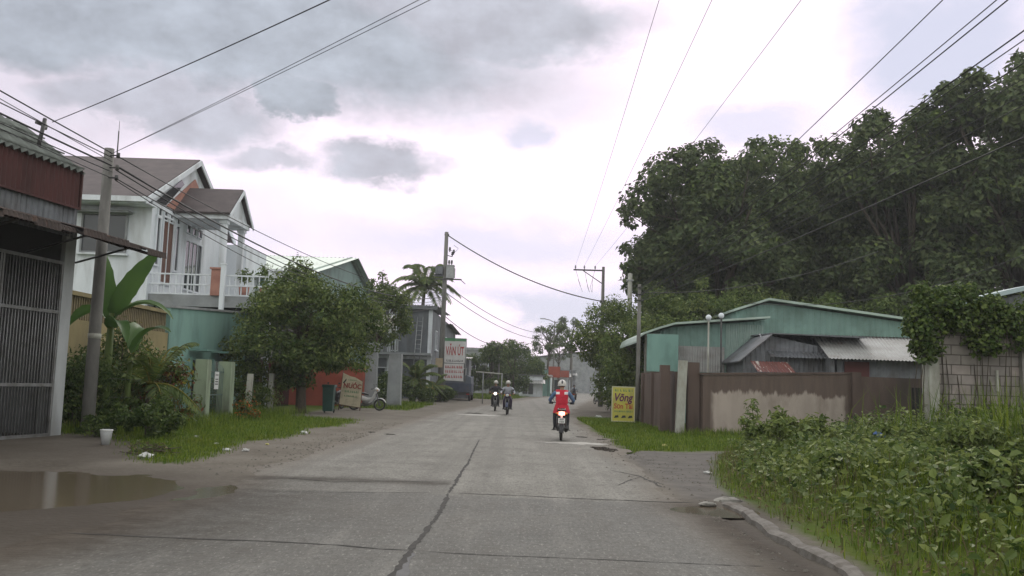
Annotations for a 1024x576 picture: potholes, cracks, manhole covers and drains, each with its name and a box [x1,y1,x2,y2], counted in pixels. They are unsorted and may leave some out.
pothole [580,445,632,454]
